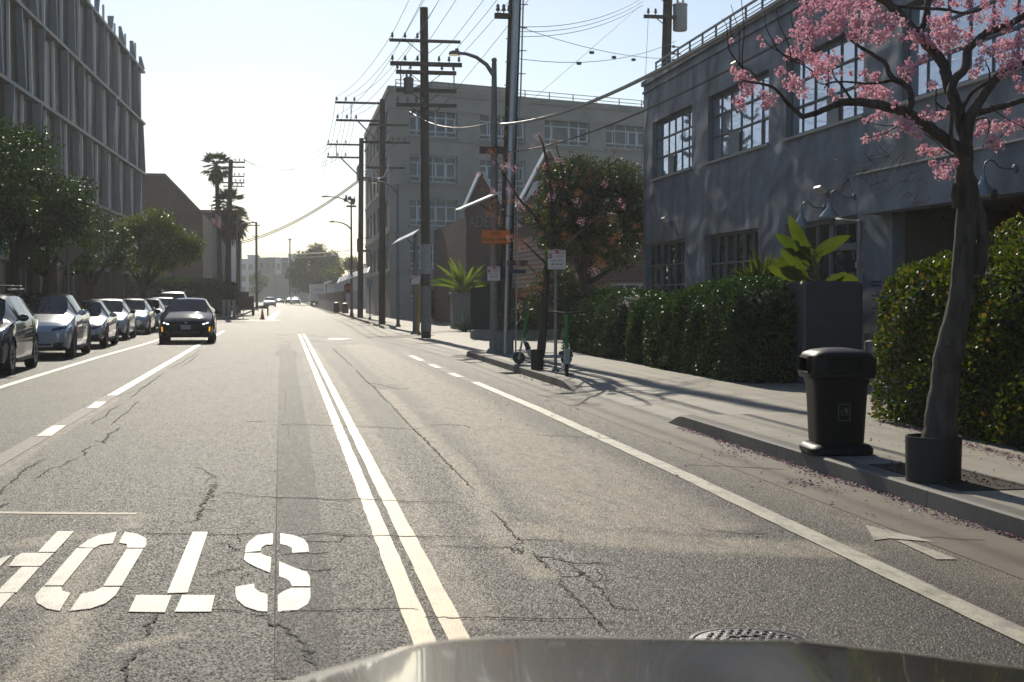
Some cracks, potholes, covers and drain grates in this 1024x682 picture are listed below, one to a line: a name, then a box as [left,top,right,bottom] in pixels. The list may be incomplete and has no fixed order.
manhole cover [689,627,810,641]
crack [119,613,160,682]
crack [281,532,638,619]
crack [0,353,196,507]
